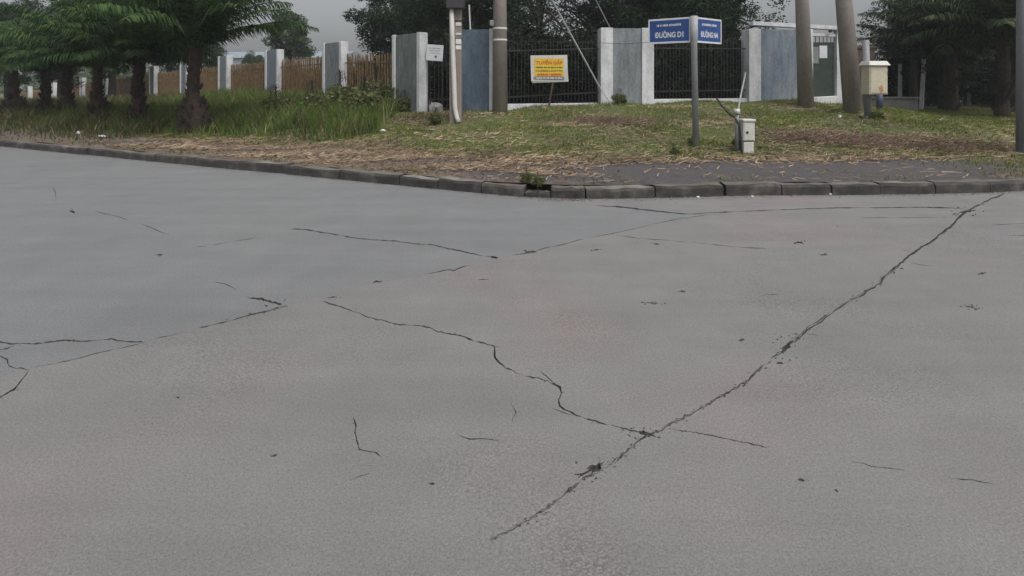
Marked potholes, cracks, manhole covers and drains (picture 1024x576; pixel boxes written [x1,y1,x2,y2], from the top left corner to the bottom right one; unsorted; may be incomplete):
crack [326,193,1024,541]
crack [0,331,185,398]
